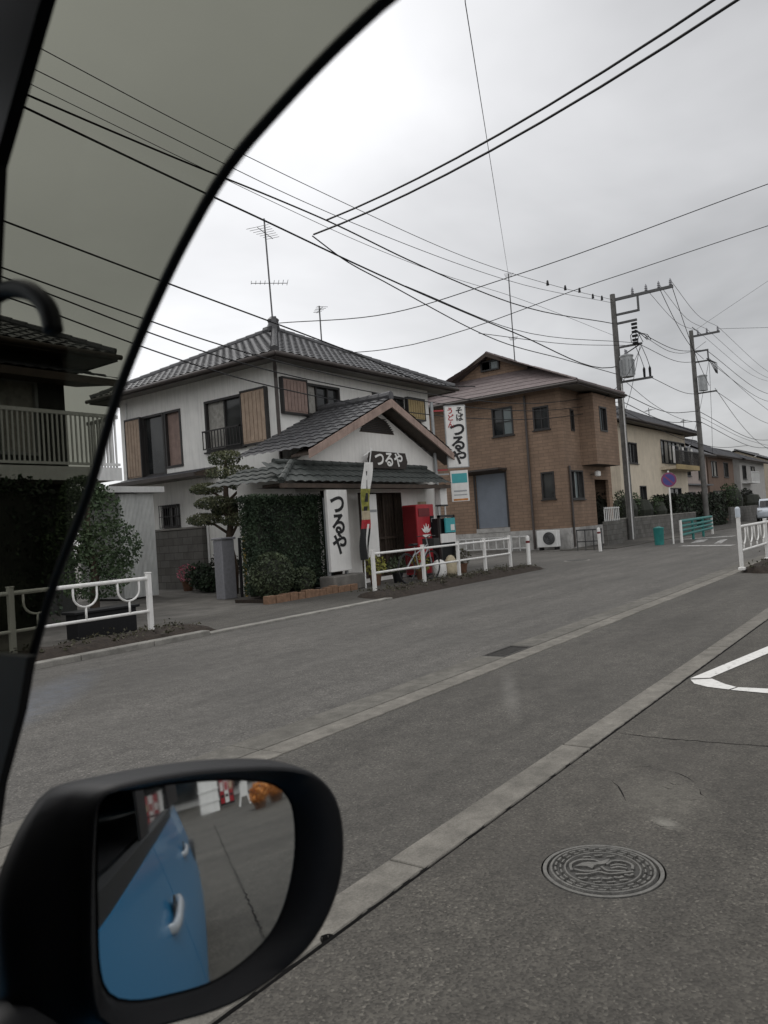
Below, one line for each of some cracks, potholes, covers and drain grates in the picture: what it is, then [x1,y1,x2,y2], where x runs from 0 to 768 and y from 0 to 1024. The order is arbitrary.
manhole cover [543,845,666,899]
drain grate [482,646,531,657]
